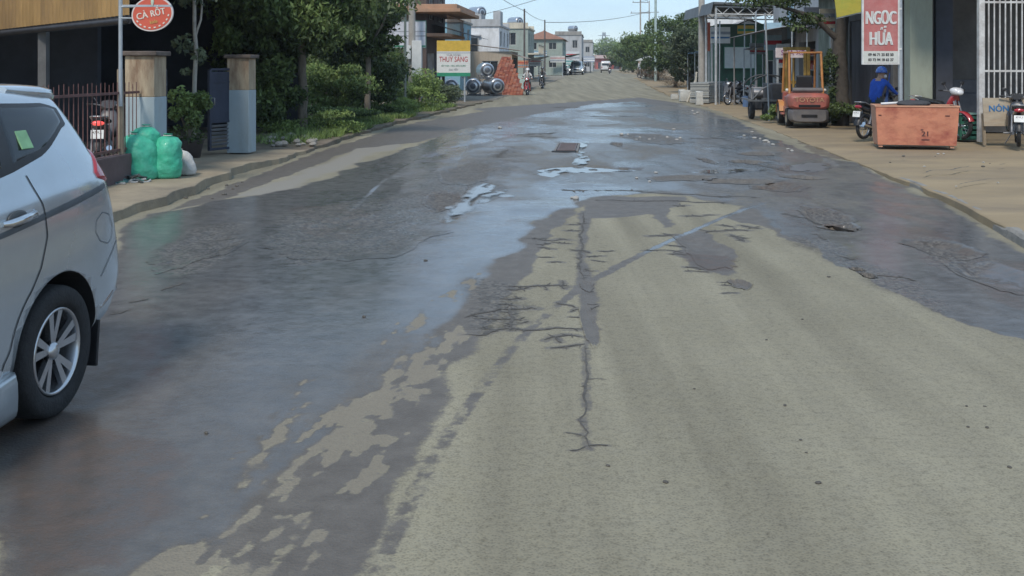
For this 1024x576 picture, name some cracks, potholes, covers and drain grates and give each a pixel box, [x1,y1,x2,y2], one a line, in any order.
pothole [798,205,860,232]
crack [462,280,605,450]
manhole cover [552,143,580,153]
